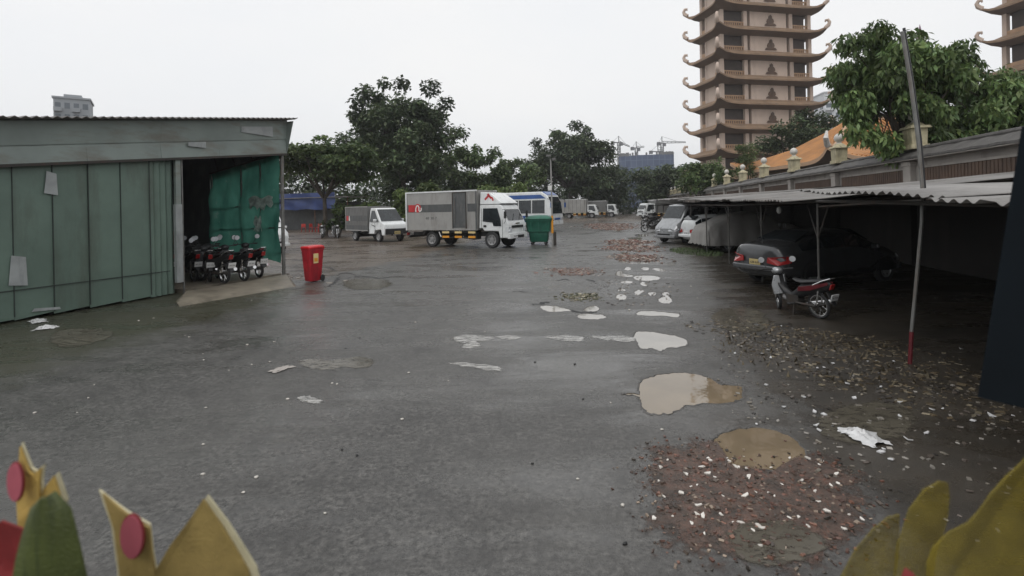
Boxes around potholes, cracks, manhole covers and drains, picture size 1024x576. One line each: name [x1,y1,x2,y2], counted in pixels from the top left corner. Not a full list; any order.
pothole [620,371,747,416]
pothole [632,330,689,352]
pothole [711,425,810,471]
